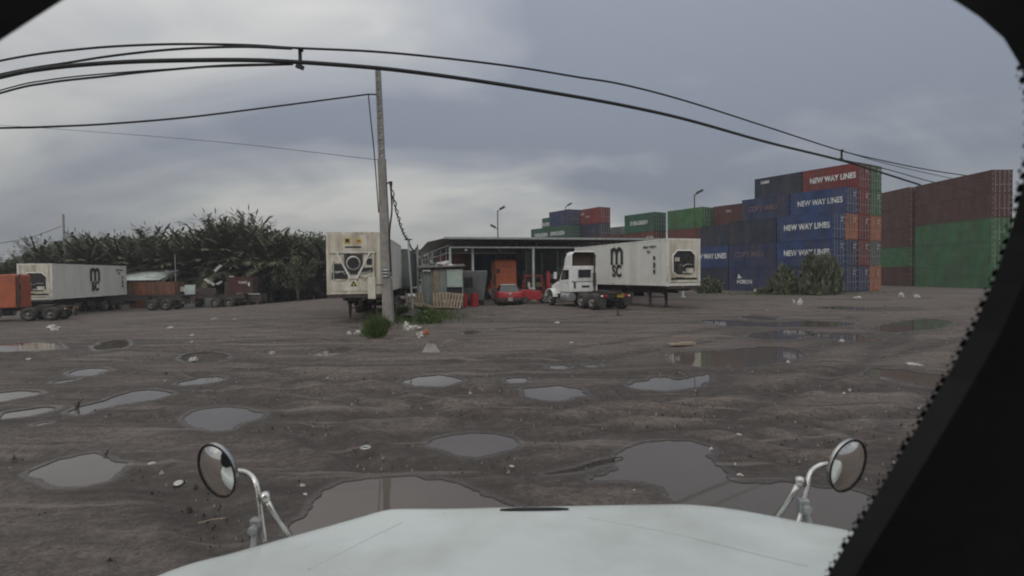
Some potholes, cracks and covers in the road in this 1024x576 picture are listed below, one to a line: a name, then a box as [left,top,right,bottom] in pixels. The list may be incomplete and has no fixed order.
pothole [69,368,112,376]
pothole [69,389,173,414]
pothole [669,346,804,368]
pothole [0,390,40,402]
pothole [289,475,515,537]
pothole [184,407,265,431]
pothole [0,342,63,351]
pothole [94,340,129,350]
pothole [748,330,814,340]
pothole [0,406,56,419]
pothole [590,440,873,531]
pothole [523,385,588,401]
